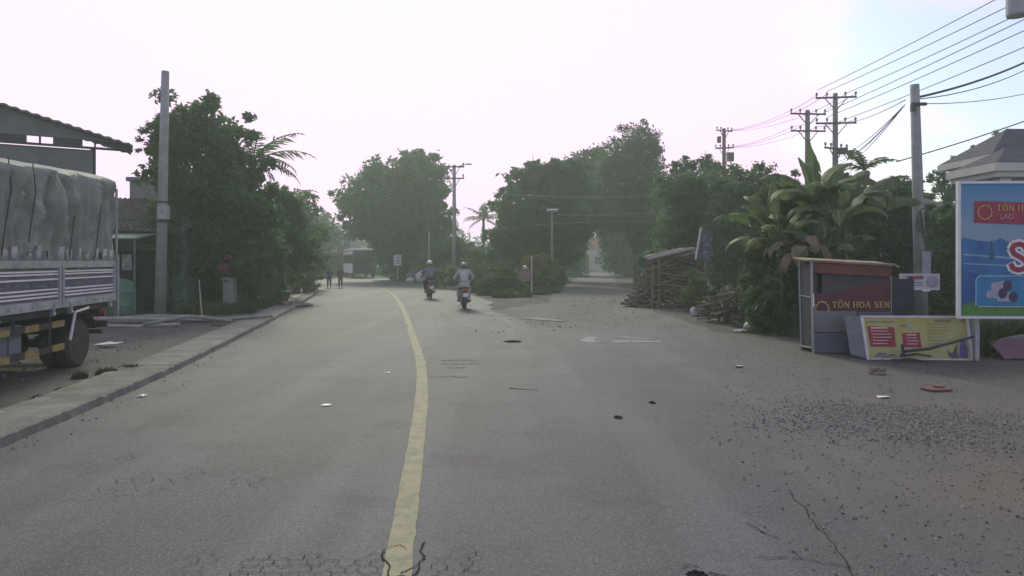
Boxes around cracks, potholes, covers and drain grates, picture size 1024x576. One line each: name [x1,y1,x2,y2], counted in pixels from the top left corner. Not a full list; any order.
crack [747,489,854,576]
crack [60,452,204,502]
crack [229,541,481,576]
